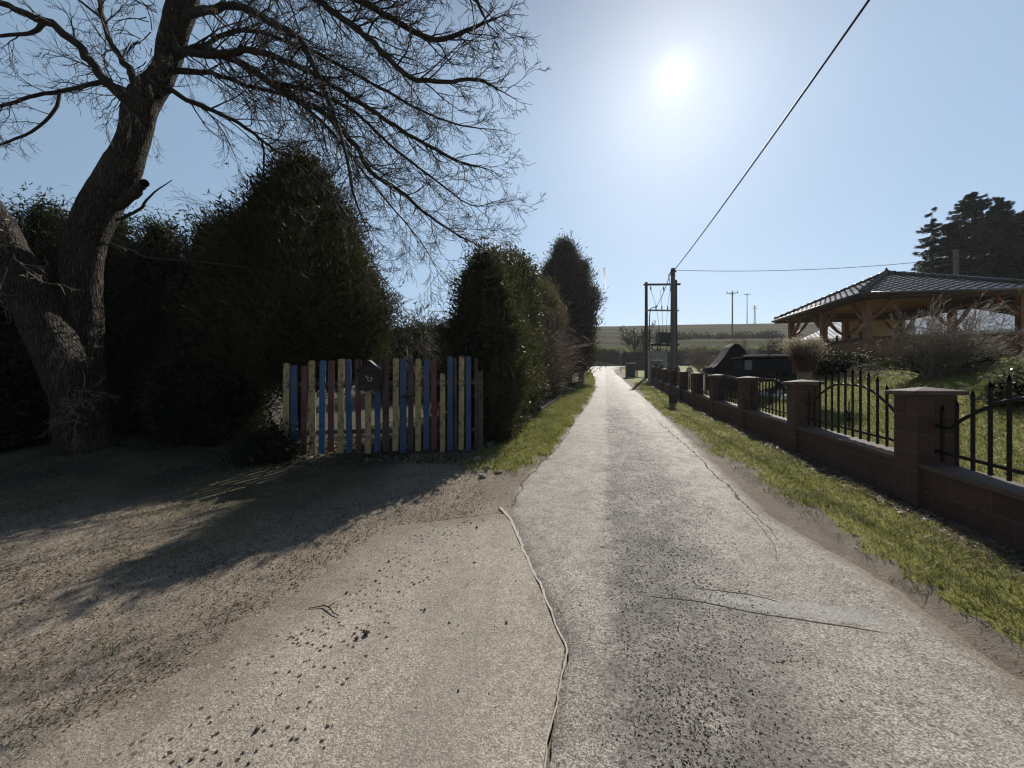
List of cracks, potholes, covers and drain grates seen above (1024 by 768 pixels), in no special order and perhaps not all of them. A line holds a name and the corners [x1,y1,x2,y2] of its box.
crack [659,422,778,561]
crack [650,588,879,632]
